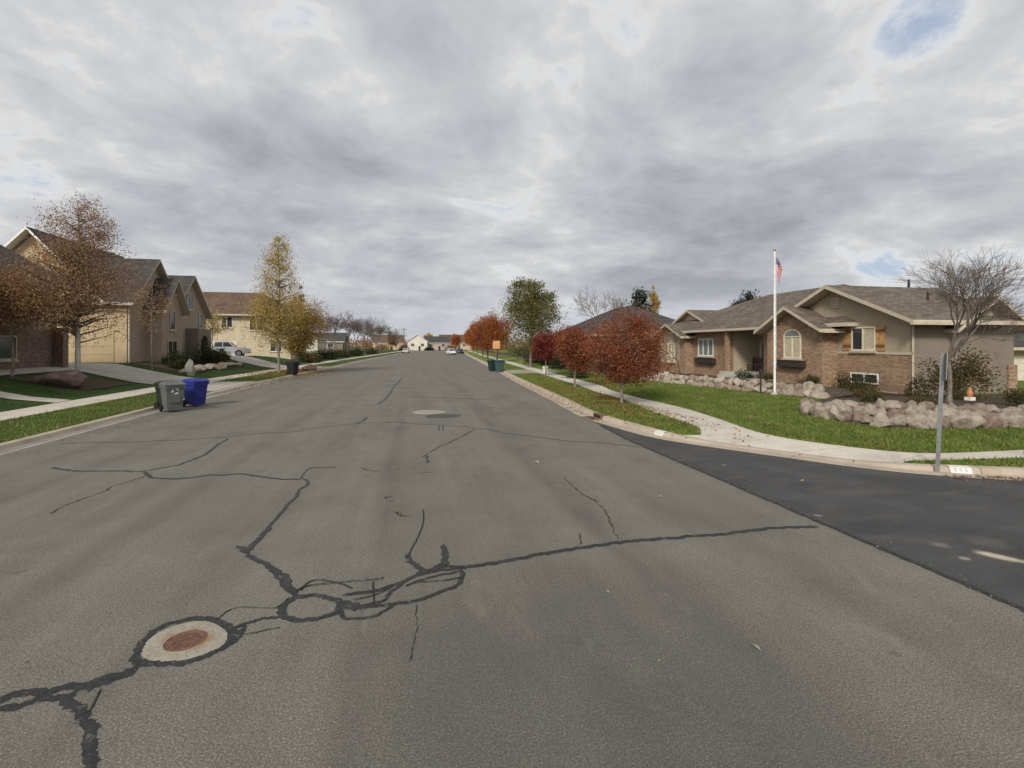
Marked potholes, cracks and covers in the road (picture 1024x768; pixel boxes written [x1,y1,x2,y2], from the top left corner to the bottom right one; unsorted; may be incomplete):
manhole cover [141,621,228,662]
crack [564,477,619,539]
crack [419,429,474,474]
crack [378,378,467,404]
crack [409,605,419,662]
crack [50,475,147,514]
